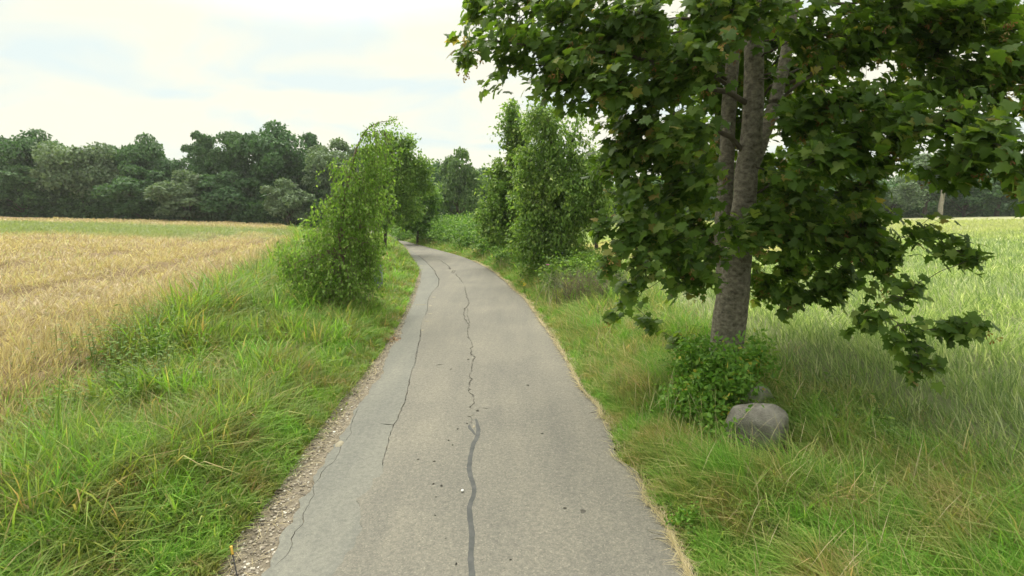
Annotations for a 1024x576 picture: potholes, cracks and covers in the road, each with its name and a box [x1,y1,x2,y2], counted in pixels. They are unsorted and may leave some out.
crack [446,264,476,422]
